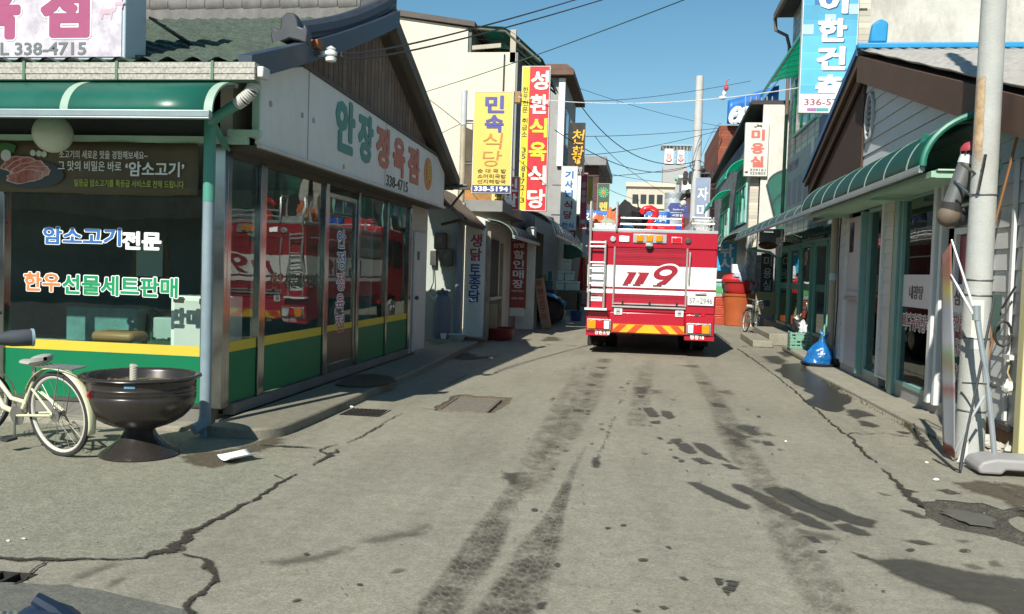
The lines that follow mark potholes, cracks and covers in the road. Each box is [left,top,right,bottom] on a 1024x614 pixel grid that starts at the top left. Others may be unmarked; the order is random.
manhole cover [434,395,512,413]
drain grate [339,408,391,417]
pothole [917,500,1024,546]
crack [268,412,403,465]
crack [737,348,957,506]
crack [0,474,296,614]
